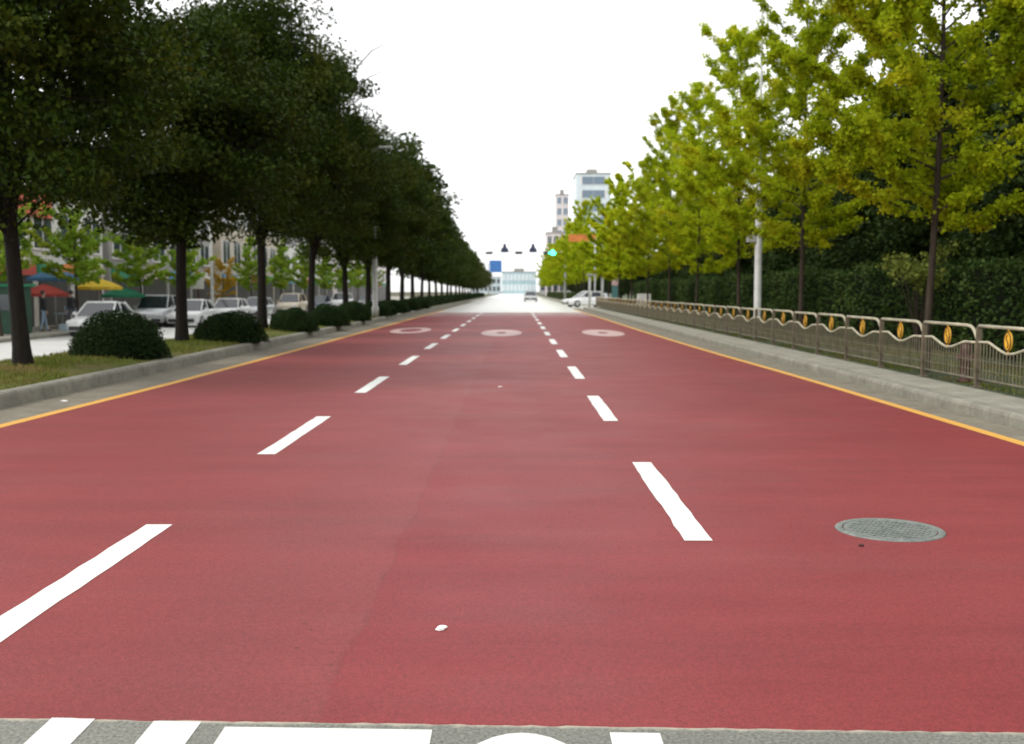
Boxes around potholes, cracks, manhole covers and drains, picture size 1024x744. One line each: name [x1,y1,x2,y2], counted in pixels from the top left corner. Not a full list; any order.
manhole cover [835,518,946,542]
